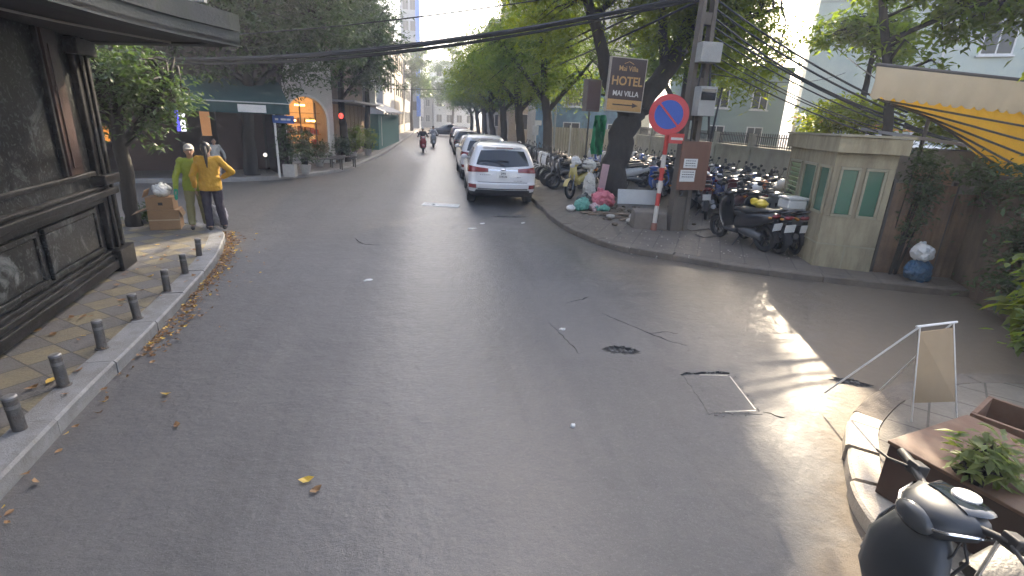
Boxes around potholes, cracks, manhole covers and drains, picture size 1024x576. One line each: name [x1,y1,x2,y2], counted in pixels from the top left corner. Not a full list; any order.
pothole [828,376,874,388]
pothole [602,345,641,355]
crack [567,297,687,346]
